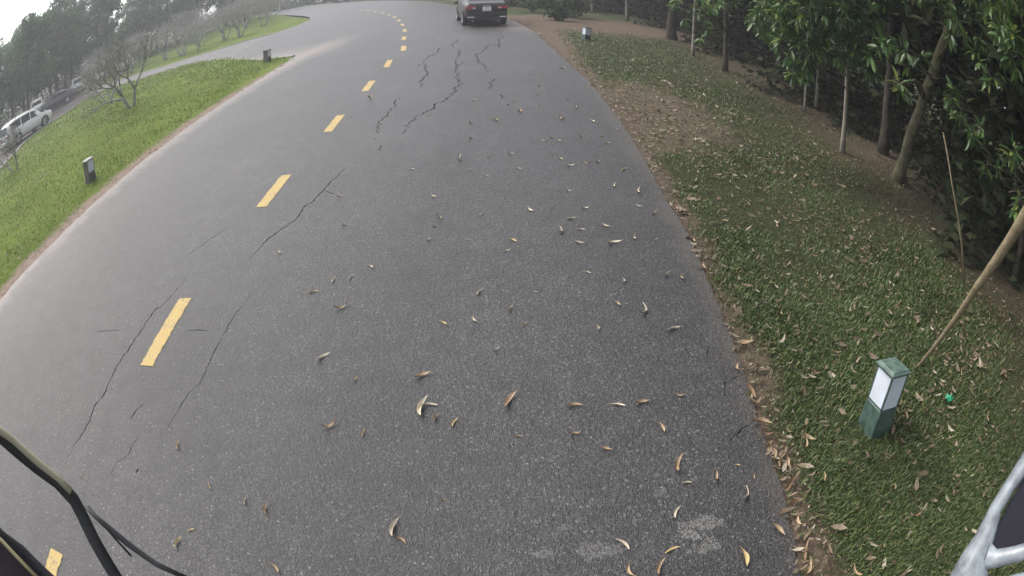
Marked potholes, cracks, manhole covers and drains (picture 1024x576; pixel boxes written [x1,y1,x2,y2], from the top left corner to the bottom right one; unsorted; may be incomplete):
crack [251,169,344,258]
crack [167,296,250,428]
crack [376,37,509,150]
crack [69,284,182,455]
